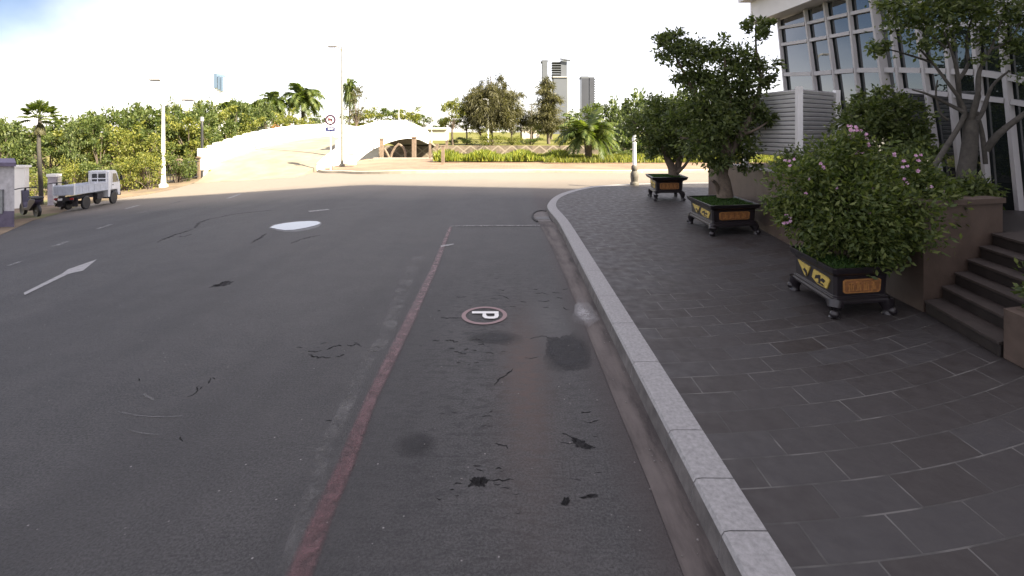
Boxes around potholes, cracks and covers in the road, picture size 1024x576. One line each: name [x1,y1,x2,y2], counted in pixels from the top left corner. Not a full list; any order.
crack [421,339,503,365]
crack [300,342,382,359]
pothole [560,433,596,450]
drain grate [532,210,551,222]
crack [159,210,269,241]
pothole [450,465,514,496]
